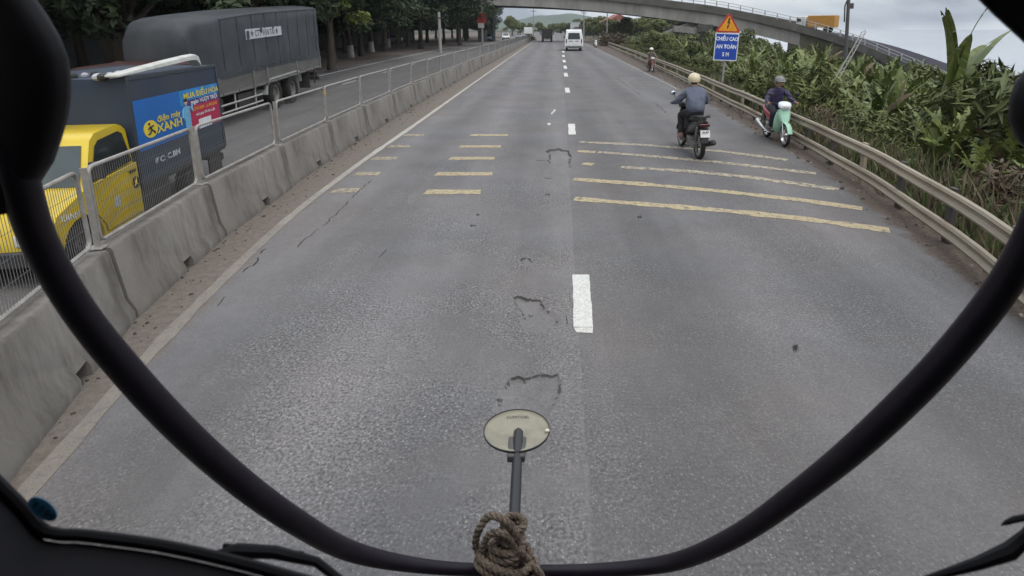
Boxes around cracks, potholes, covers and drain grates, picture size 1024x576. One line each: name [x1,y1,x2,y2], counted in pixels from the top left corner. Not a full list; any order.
pothole [493,373,562,420]
pothole [514,296,561,332]
crack [298,180,372,246]
pothole [546,148,573,176]
pothole [518,258,534,266]
